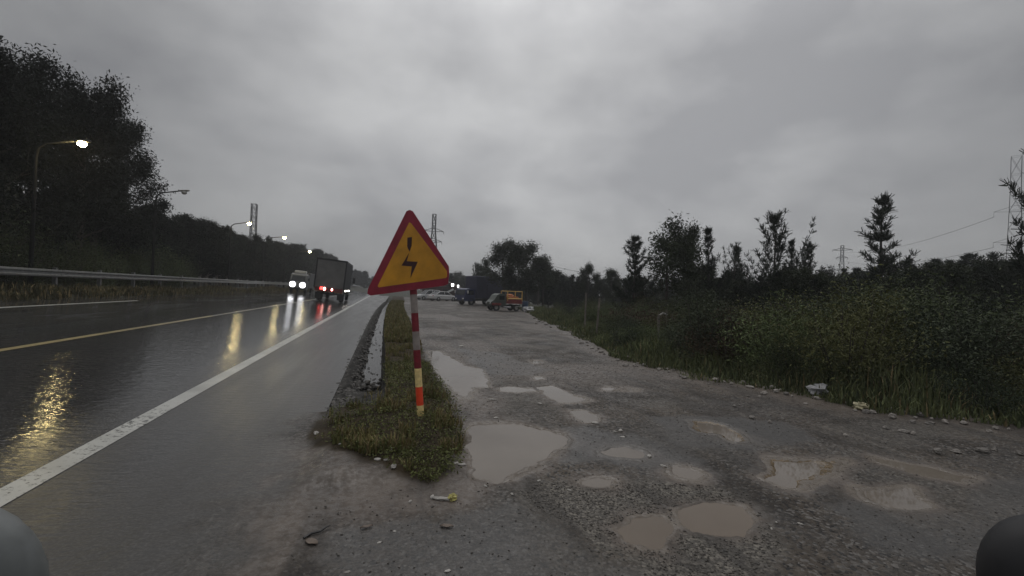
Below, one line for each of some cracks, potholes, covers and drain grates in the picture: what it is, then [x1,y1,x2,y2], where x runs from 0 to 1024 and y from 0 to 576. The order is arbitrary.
pothole [497,385,538,393]
pothole [854,483,941,514]
pothole [534,384,589,404]
pothole [461,422,573,486]
pothole [425,350,494,407]
pothole [670,500,761,542]
pothole [685,419,751,444]
pothole [576,475,616,490]
pothole [567,409,602,424]
pothole [608,513,679,553]
pothole [665,463,709,482]
pothole [755,457,842,491]
